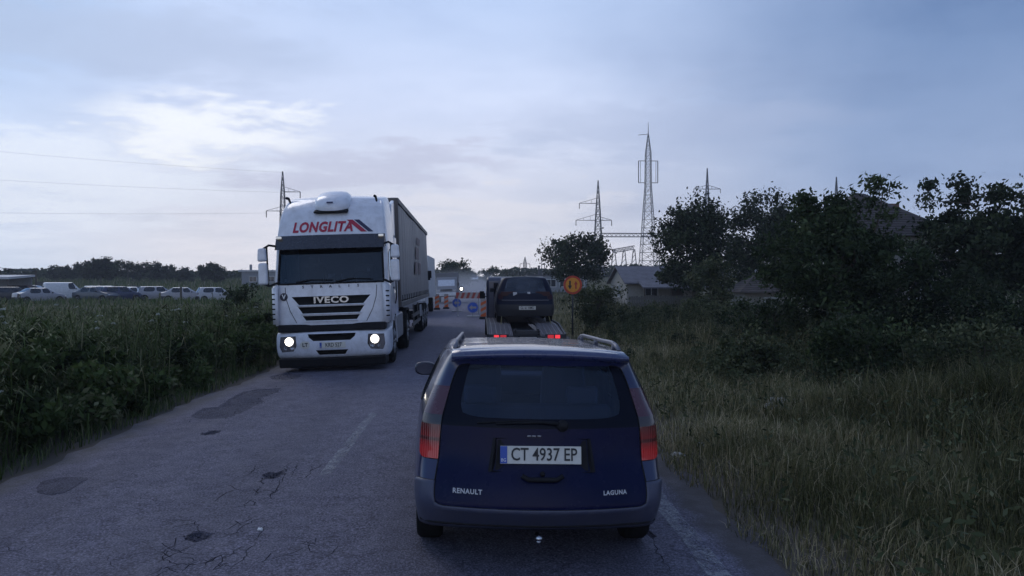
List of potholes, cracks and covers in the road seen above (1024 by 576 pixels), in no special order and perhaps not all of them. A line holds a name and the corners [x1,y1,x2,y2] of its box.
crack [146,463,338,576]
pothole [183,531,215,543]
pothole [261,468,285,479]
